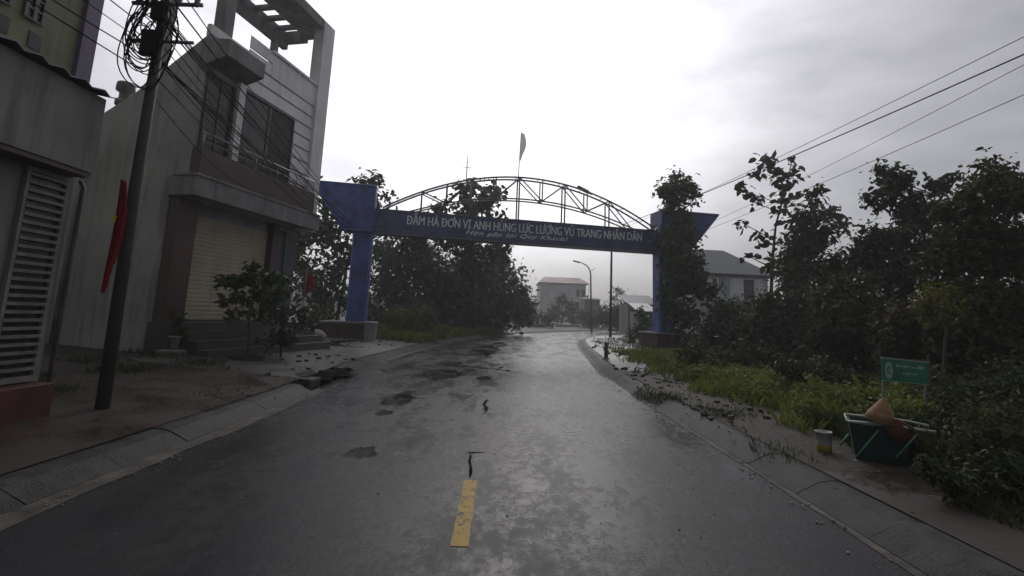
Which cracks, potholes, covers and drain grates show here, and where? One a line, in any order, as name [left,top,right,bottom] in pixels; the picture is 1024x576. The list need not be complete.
pothole [384,396,410,405]
pothole [340,446,378,460]
pothole [426,370,457,378]
crack [468,452,485,479]
